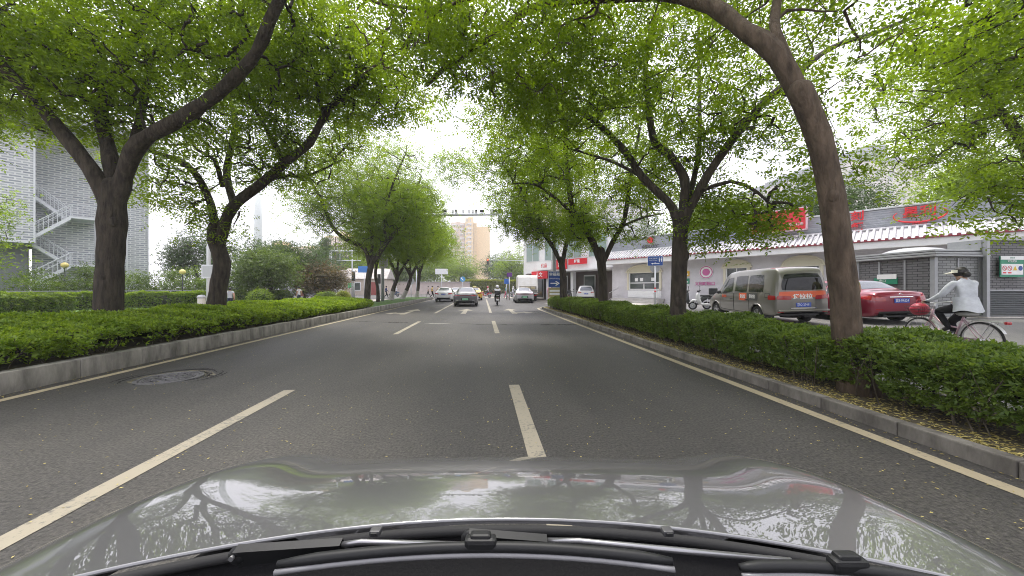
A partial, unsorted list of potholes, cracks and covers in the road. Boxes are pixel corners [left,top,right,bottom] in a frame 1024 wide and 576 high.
manhole cover [132,371,205,385]
